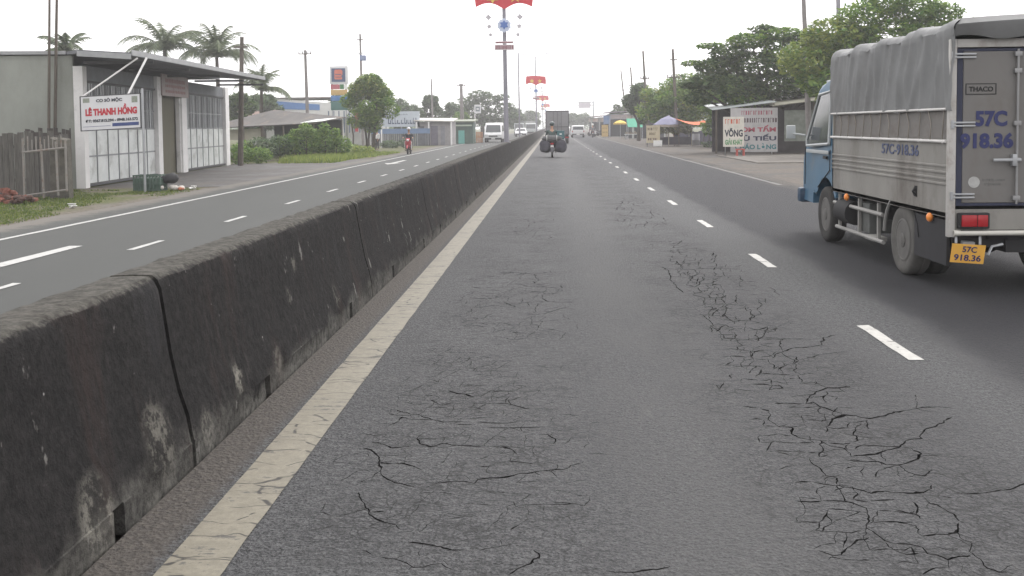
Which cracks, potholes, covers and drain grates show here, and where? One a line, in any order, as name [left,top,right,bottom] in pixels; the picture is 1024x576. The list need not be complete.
crack [615,198,847,399]
crack [725,351,1012,575]
crack [461,268,578,340]
crack [958,483,1024,494]
crack [308,348,607,575]
